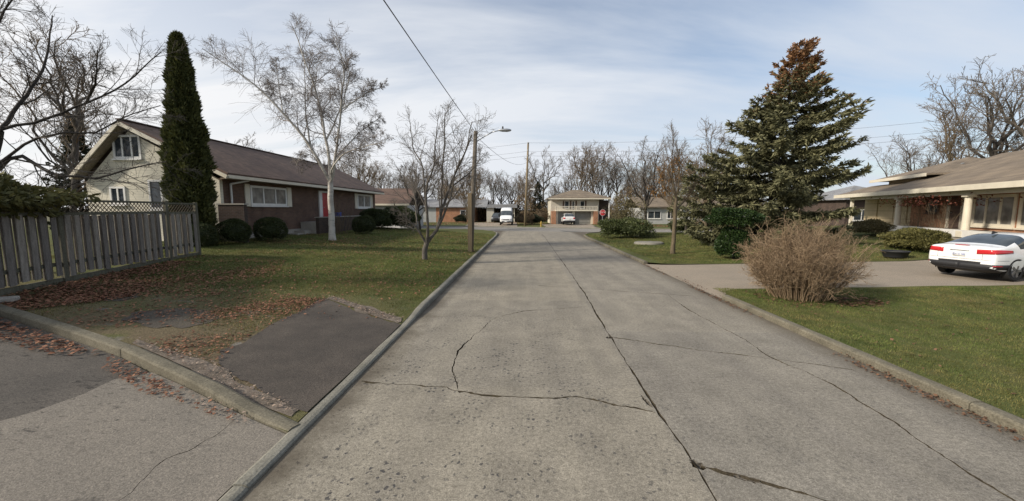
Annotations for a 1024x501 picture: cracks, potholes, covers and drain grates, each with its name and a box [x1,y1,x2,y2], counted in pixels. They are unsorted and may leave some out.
crack [120,429,224,500]
crack [363,239,1016,501]
